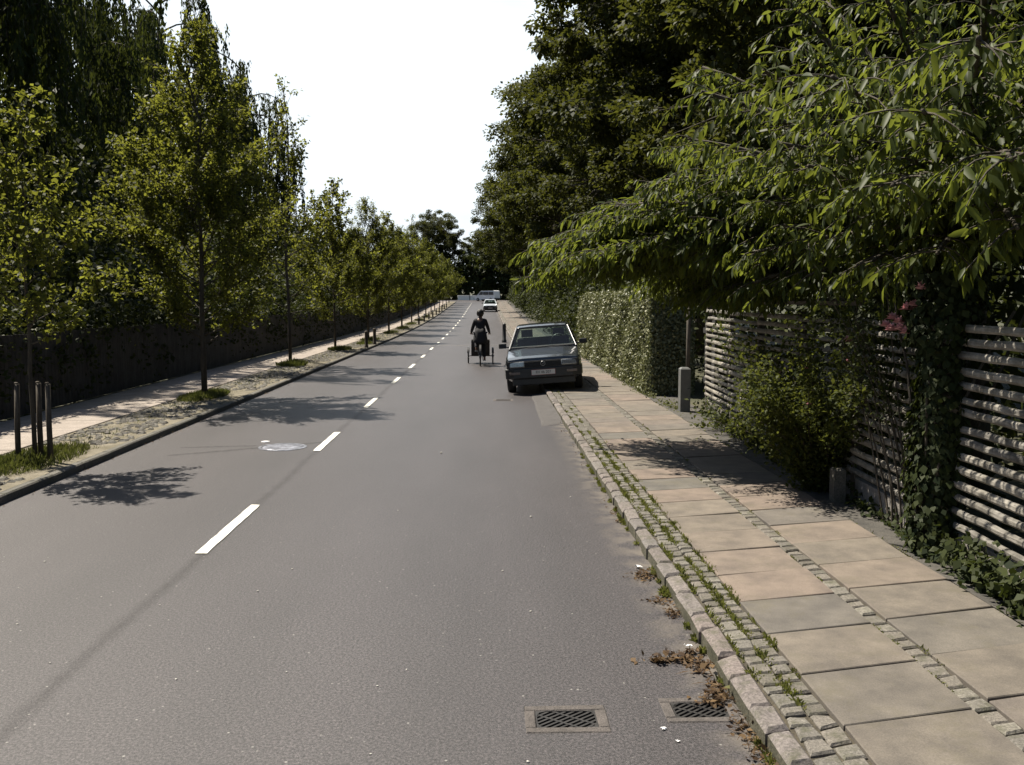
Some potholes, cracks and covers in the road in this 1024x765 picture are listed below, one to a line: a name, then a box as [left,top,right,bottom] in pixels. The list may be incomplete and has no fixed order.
drain grate [658,697,743,723]
drain grate [524,705,612,734]
manhole cover [258,443,307,451]
